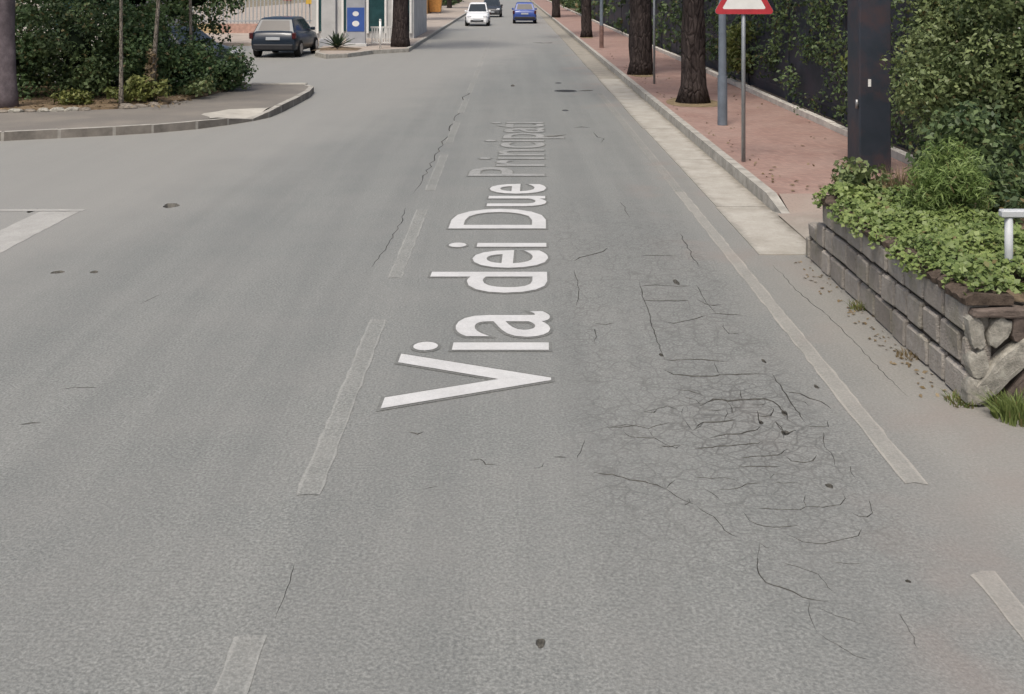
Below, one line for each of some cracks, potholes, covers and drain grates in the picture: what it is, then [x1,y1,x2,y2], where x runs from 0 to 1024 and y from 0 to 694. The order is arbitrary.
crack [538,235,873,660]
